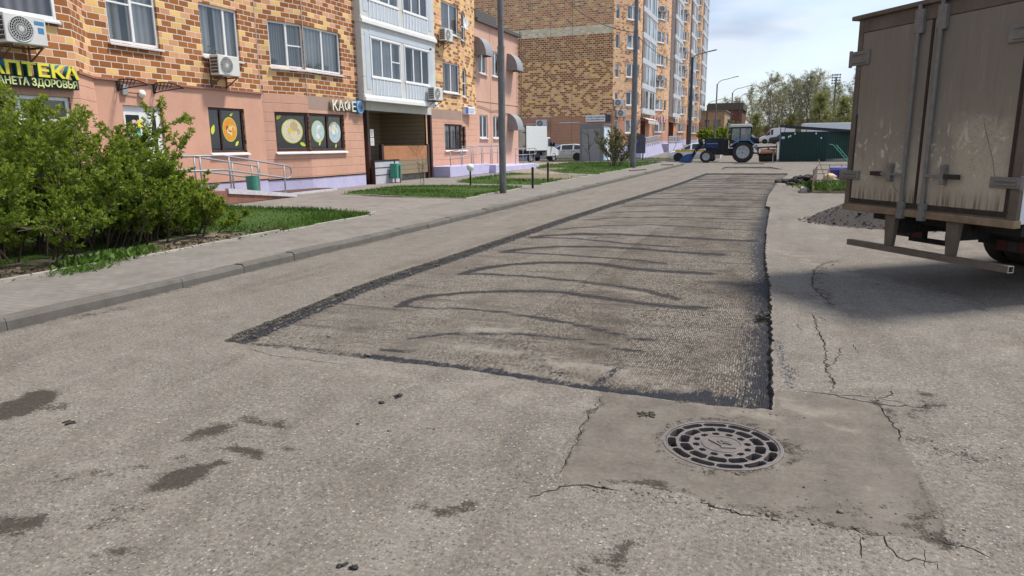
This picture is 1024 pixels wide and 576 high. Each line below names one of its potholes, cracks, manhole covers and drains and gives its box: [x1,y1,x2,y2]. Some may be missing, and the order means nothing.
crack [797,261,928,441]
manhole cover [662,421,784,471]
crack [849,528,990,569]
crack [528,484,620,498]
